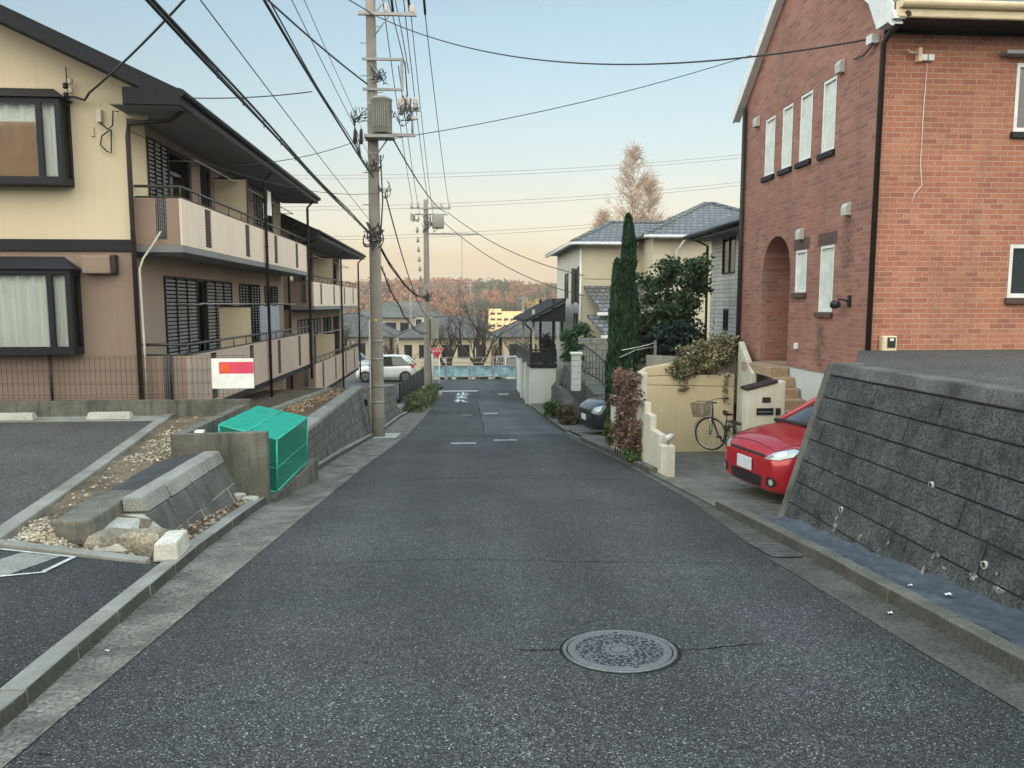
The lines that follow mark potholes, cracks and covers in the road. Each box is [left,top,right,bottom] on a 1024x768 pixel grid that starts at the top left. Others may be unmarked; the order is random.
drain grate [749,543,804,563]
manhole cover [559,629,681,675]
